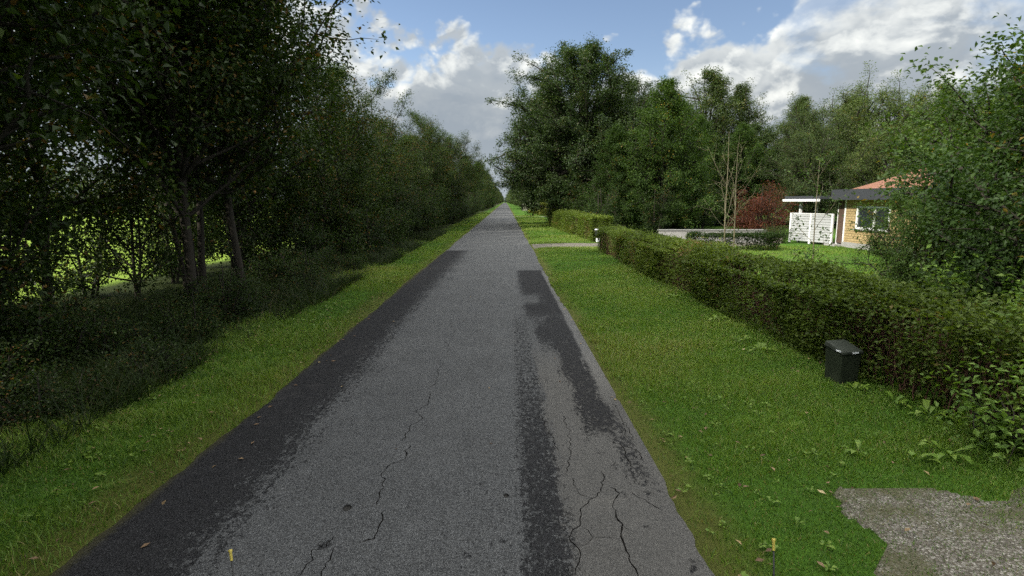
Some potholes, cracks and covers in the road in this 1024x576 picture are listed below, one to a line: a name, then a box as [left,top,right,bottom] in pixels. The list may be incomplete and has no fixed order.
crack [501,405,661,576]
crack [300,536,336,576]
crack [360,320,454,543]
